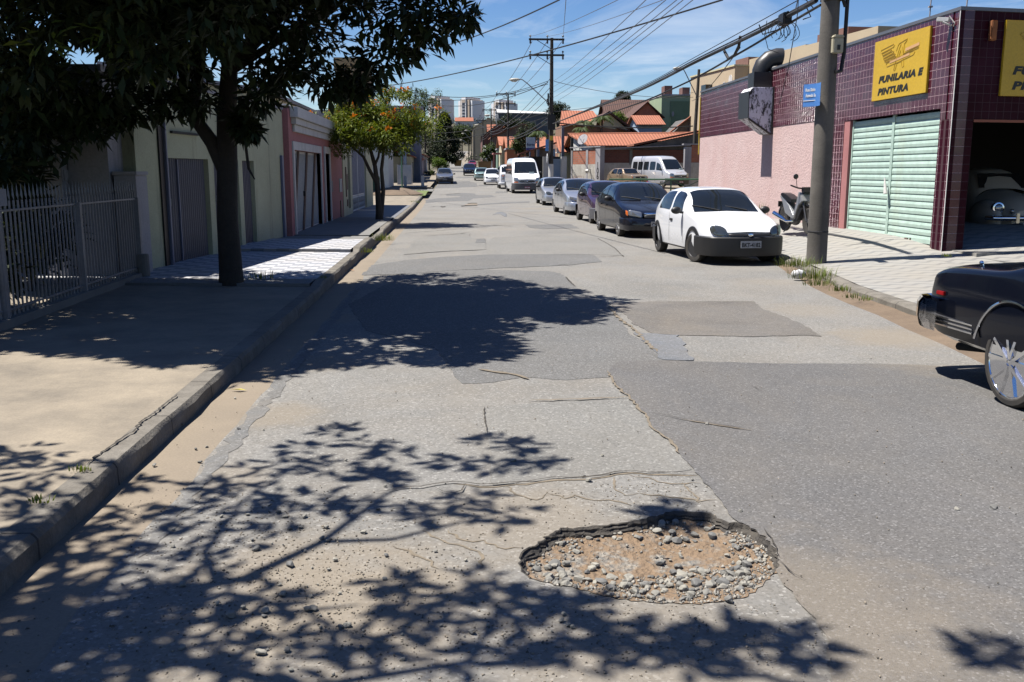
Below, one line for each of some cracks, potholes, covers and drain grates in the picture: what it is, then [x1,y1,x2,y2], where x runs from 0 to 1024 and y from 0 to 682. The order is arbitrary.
pothole [518,511,779,604]
crack [383,470,711,505]
